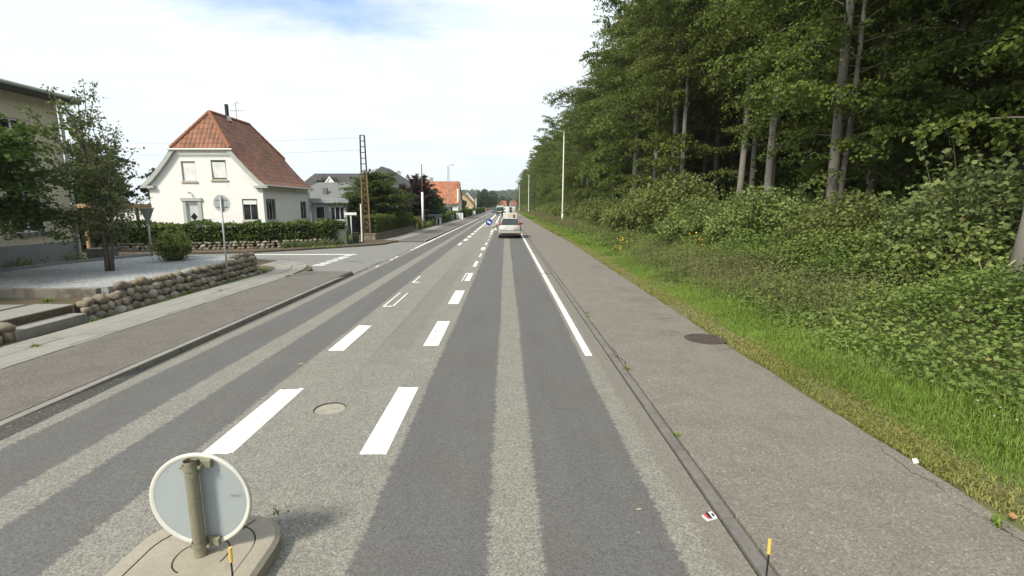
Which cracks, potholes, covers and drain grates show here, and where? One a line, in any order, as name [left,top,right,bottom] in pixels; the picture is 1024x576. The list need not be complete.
manhole cover [684,333,727,345]
manhole cover [313,402,346,415]
